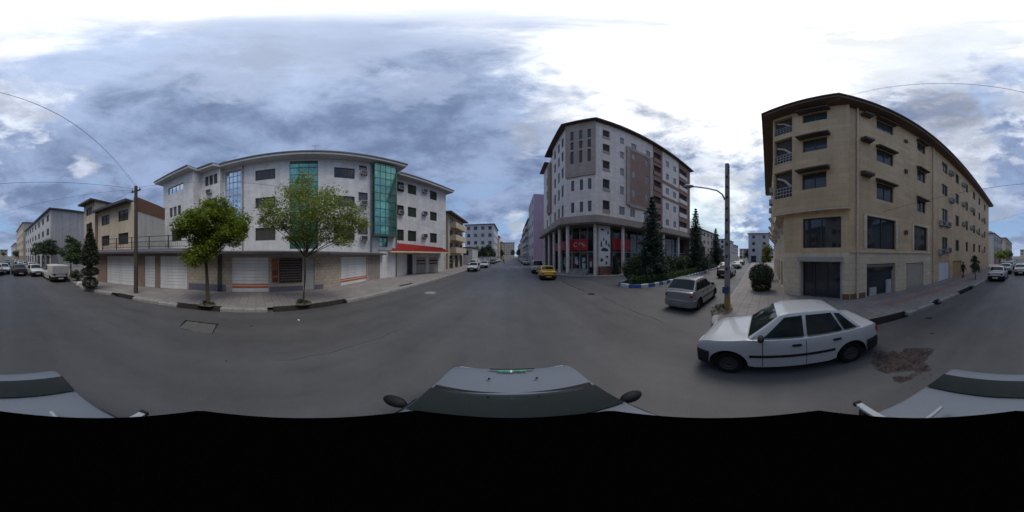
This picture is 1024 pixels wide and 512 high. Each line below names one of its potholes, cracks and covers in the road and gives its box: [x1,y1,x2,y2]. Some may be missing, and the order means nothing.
pothole [856,338,954,388]
manhole cover [179,320,218,334]
